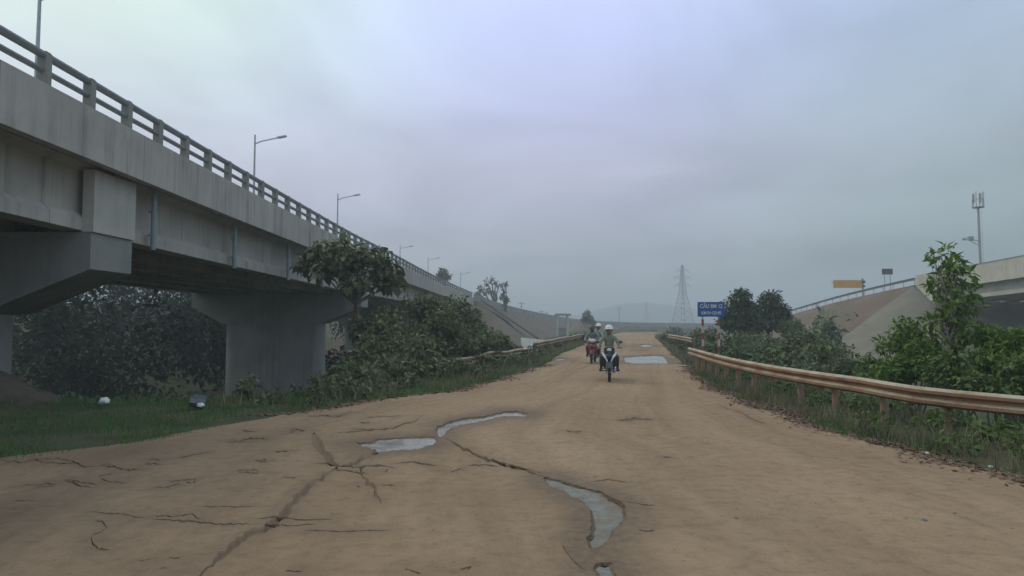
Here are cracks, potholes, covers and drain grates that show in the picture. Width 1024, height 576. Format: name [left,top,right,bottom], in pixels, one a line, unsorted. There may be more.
pothole [357,436,438,454]
pothole [544,477,626,549]
crack [230,430,288,474]
crack [91,506,386,550]
pothole [436,411,527,437]
crack [0,458,196,502]
pothole [623,355,669,364]
pothole [593,562,617,576]
